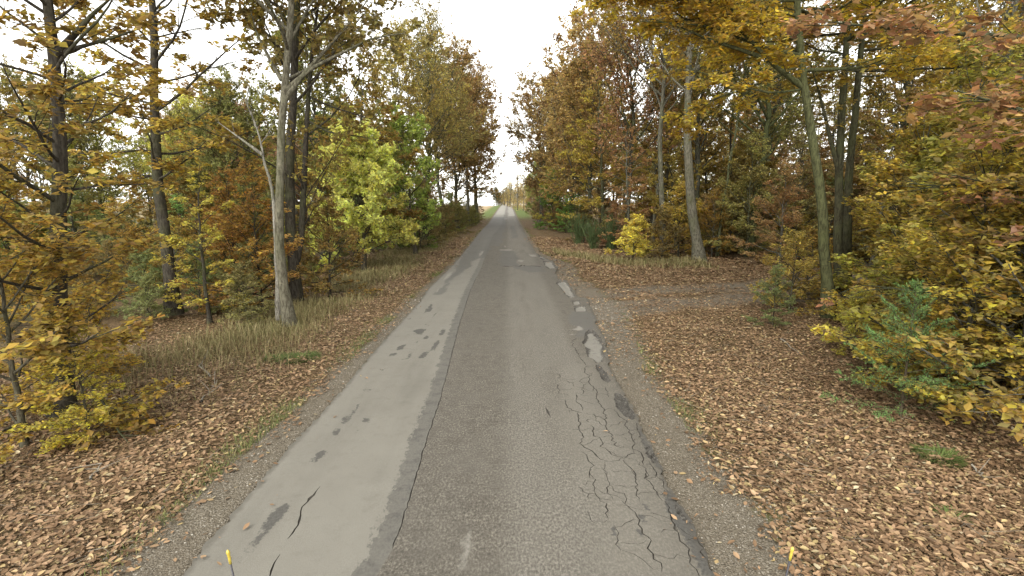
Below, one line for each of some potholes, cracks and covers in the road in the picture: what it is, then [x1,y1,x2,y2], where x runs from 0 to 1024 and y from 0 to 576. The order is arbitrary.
crack [269,488,319,576]
crack [557,339,712,575]
pothole [614,392,636,420]
